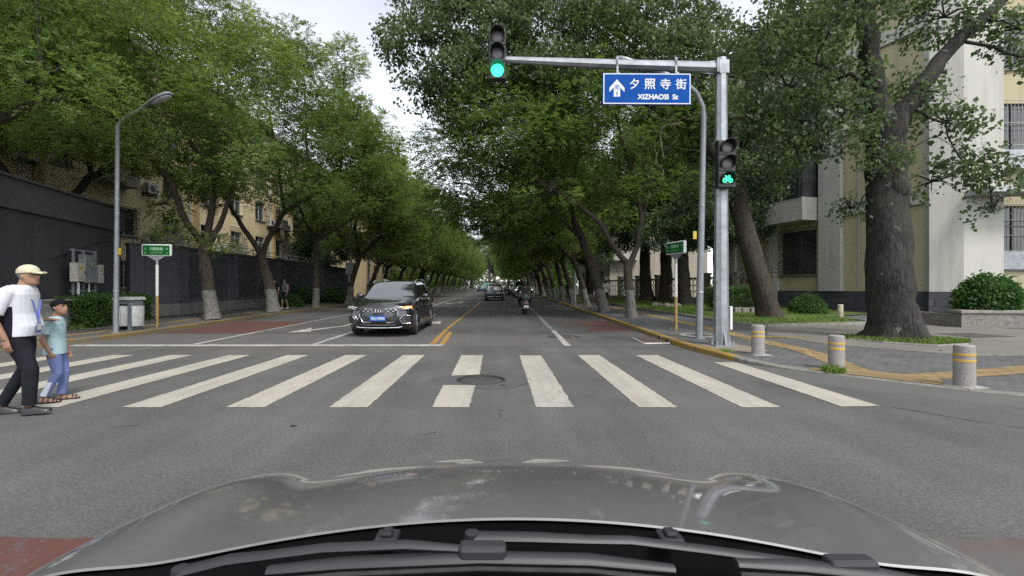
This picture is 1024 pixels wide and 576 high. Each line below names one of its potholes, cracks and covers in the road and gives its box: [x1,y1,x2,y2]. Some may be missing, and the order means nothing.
manhole cover [456,375,506,385]
